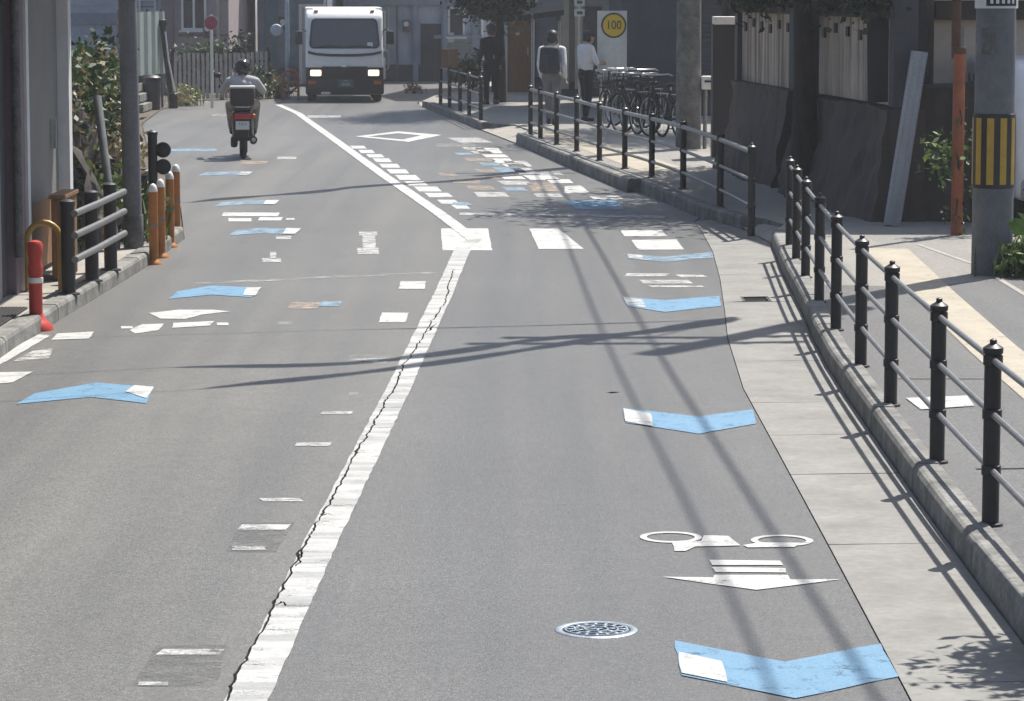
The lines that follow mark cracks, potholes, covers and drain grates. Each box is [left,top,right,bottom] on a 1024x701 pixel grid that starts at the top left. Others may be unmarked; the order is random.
crack [227,271,453,701]
manhole cover [555,621,638,639]
